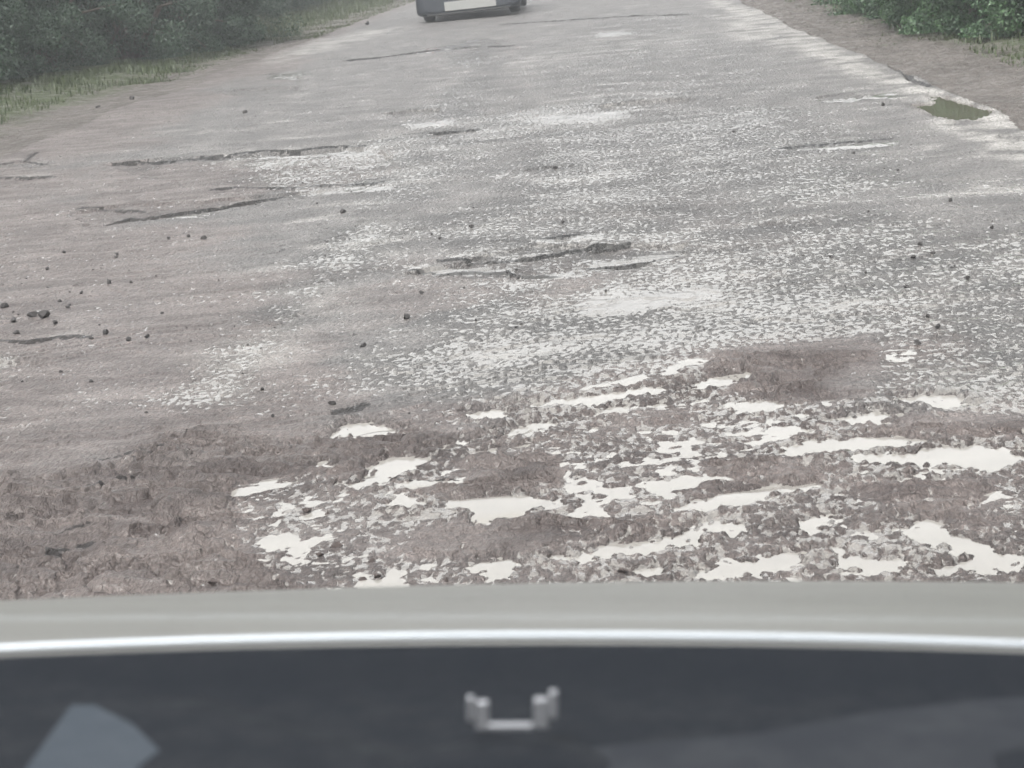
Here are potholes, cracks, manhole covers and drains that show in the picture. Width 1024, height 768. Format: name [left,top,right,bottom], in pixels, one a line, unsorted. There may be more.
pothole [514,373,683,408]
crack [75,145,385,226]
pothole [840,437,1024,475]
crack [344,45,515,61]
crack [0,152,57,181]
pothole [818,401,911,425]
pothole [807,540,938,581]
pothole [372,489,434,507]
pothole [874,464,960,482]
pothole [905,92,1001,120]
pothole [686,542,812,581]
pothole [719,393,806,416]
